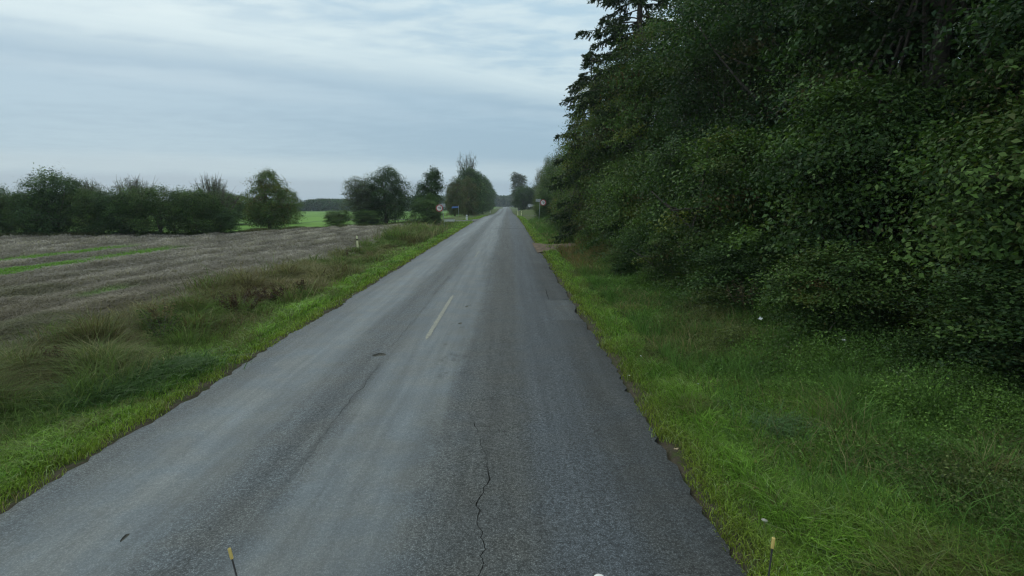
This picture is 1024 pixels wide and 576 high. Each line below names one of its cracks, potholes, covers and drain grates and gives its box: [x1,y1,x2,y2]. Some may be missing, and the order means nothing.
crack [470,420,491,576]
